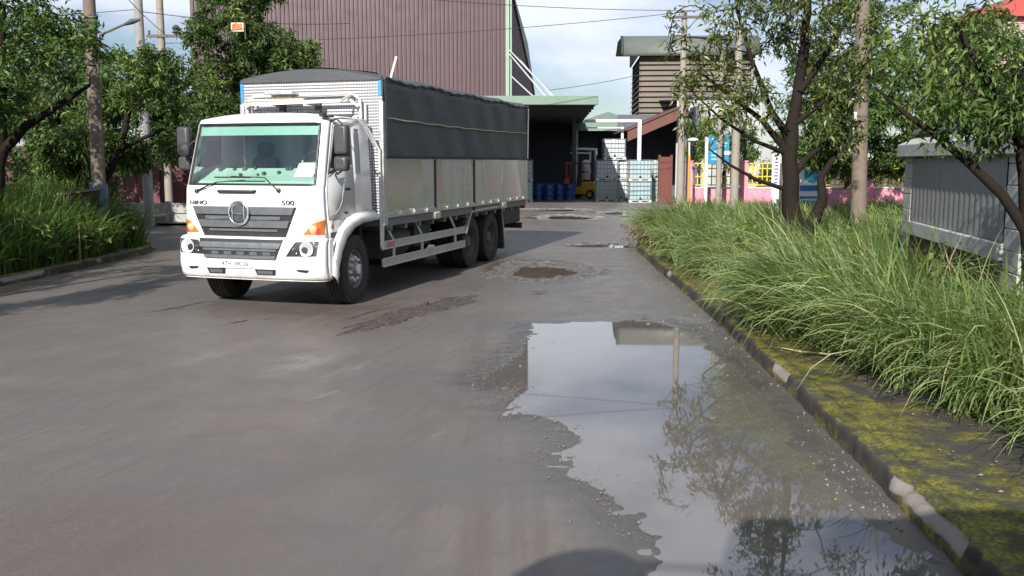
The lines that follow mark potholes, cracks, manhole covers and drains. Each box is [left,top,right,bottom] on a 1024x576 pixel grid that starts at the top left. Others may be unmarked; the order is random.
pothole [335,295,479,336]
pothole [481,260,610,283]
